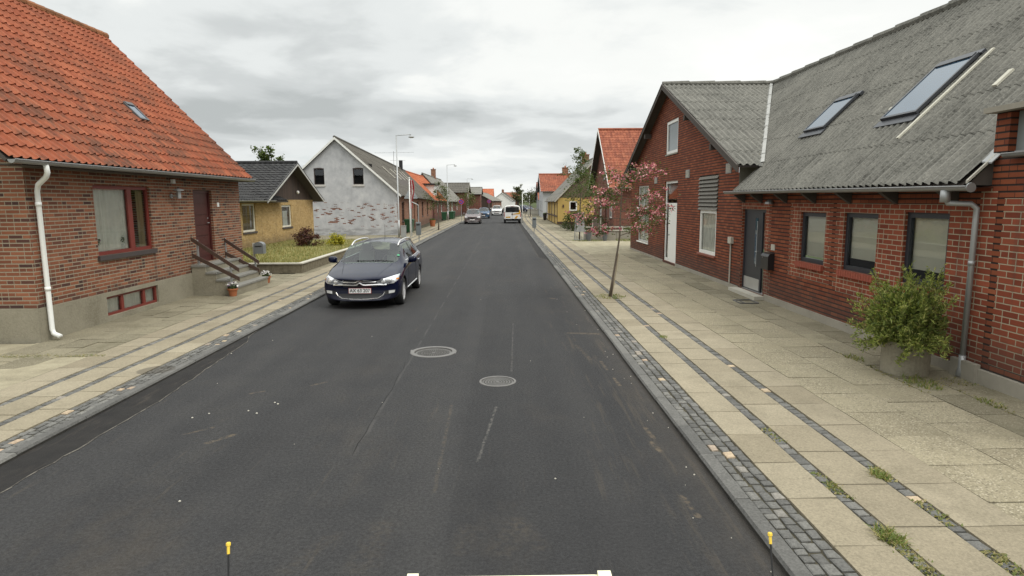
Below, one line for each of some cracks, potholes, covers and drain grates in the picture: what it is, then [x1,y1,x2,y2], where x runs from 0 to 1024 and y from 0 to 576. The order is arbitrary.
manhole cover [410,346,457,358]
manhole cover [479,376,516,387]
